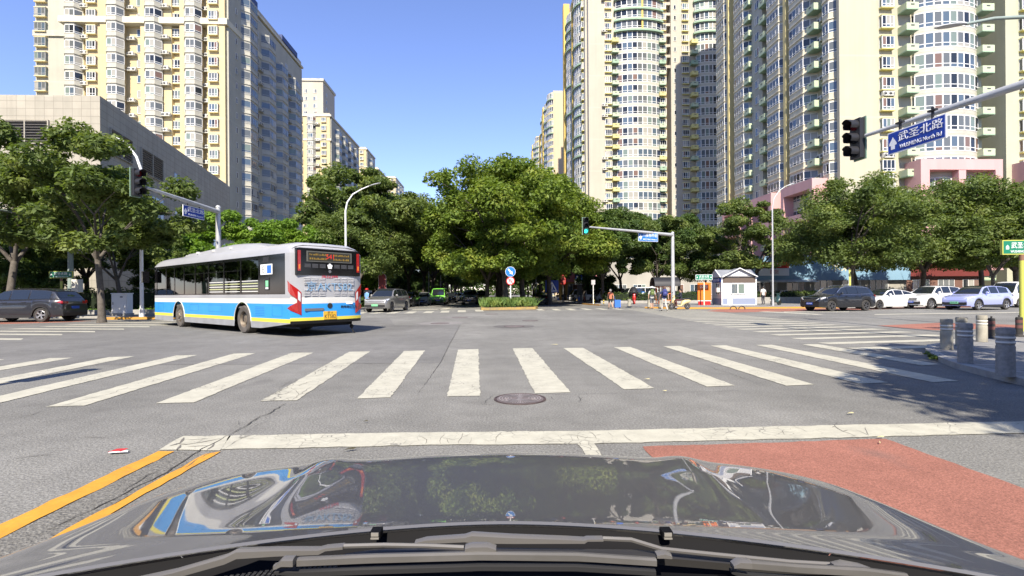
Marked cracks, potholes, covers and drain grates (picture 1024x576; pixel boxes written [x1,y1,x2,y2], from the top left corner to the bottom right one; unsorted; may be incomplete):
manhole cover [494,393,546,405]
